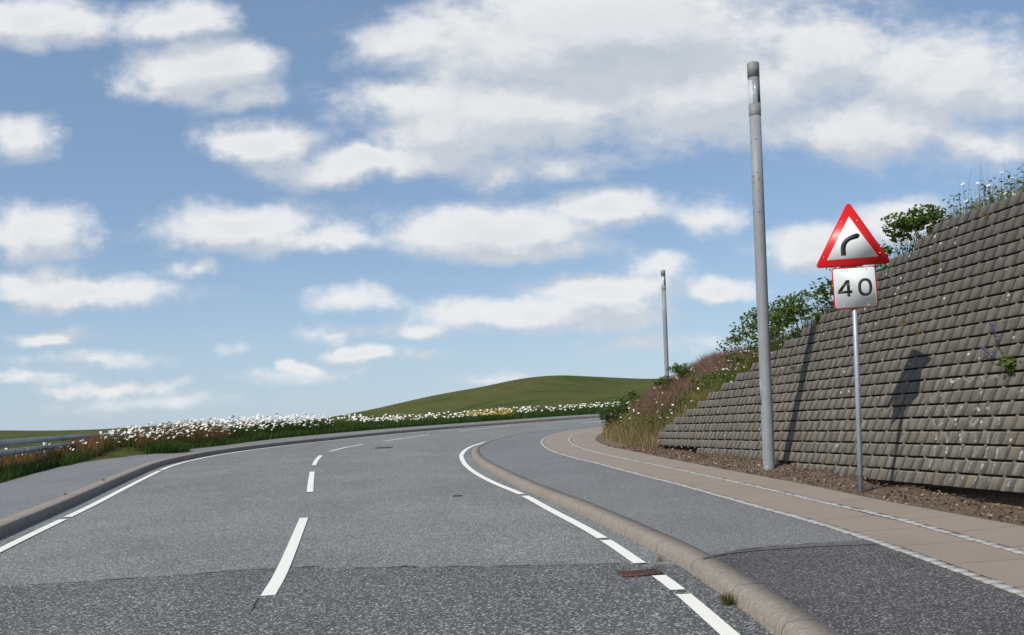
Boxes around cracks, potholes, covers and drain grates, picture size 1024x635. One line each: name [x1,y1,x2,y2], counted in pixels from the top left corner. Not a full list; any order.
drain grate [617,569,663,577]
